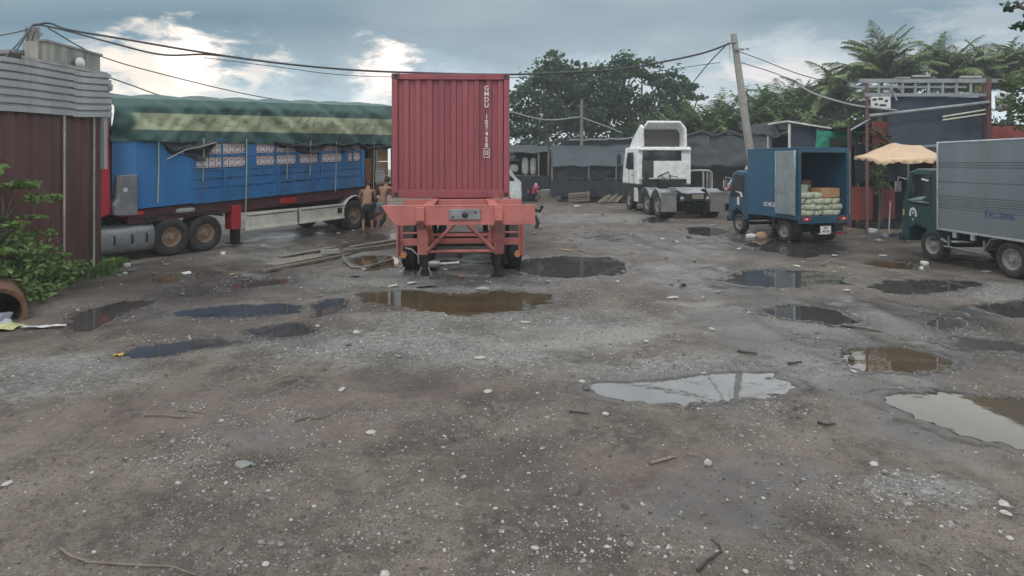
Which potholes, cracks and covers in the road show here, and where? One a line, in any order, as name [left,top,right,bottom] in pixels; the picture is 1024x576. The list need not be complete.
pothole [308,296,352,320]
pothole [752,303,871,328]
pothole [565,369,815,411]
pothole [855,278,991,297]
pothole [240,321,326,341]
pothole [110,337,252,361]
pothole [345,288,567,320]
pothole [710,267,867,291]
pothole [157,302,313,320]
pothole [861,386,1024,456]
pothole [945,299,1024,321]
pothole [491,254,641,281]
